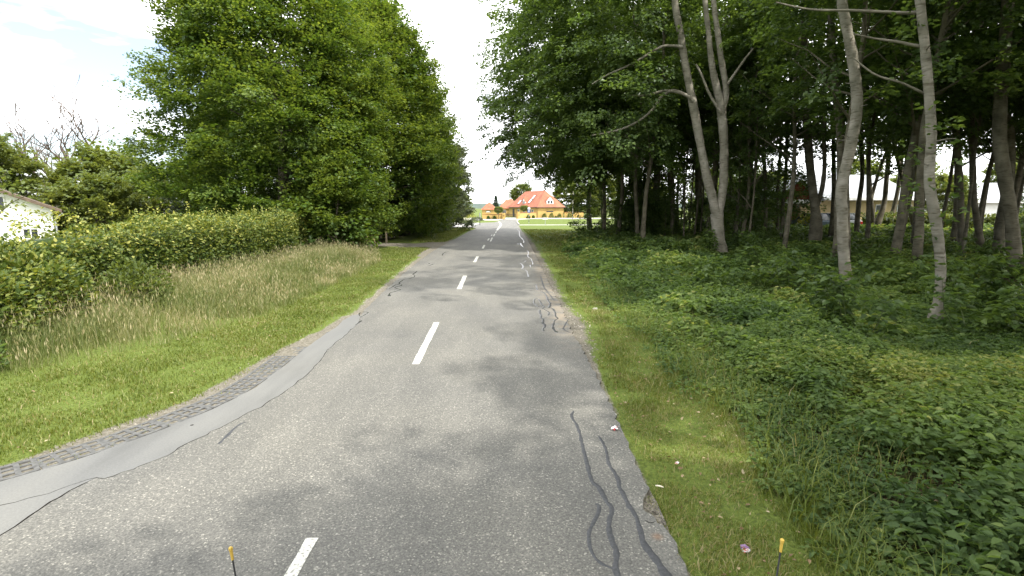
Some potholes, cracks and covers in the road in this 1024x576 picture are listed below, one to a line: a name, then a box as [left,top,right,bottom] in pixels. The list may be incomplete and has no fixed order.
pothole [643,489,669,531]
